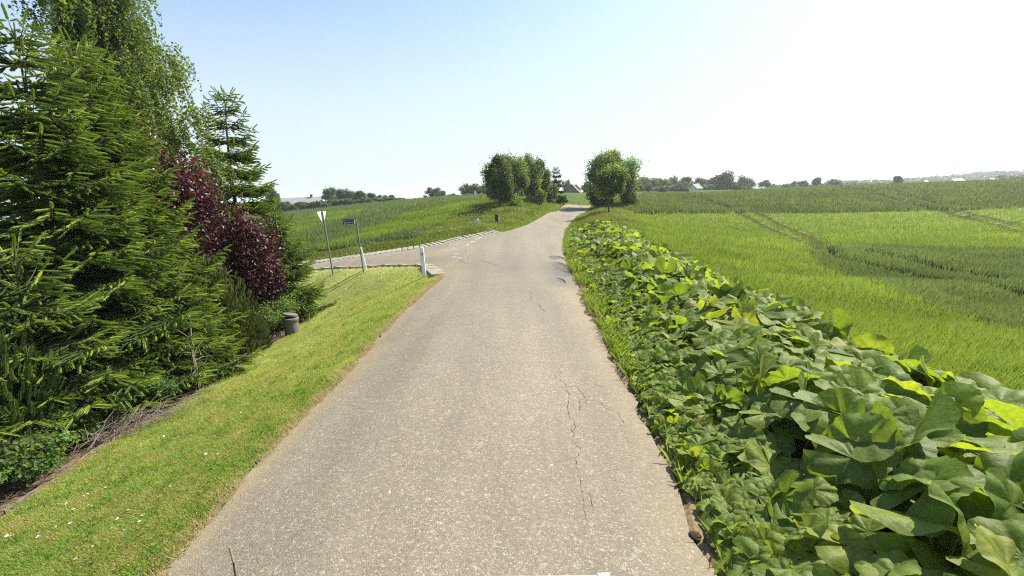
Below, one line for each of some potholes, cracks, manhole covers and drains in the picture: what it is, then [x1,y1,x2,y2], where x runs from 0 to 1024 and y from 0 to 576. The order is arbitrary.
pothole [551,262,573,277]
